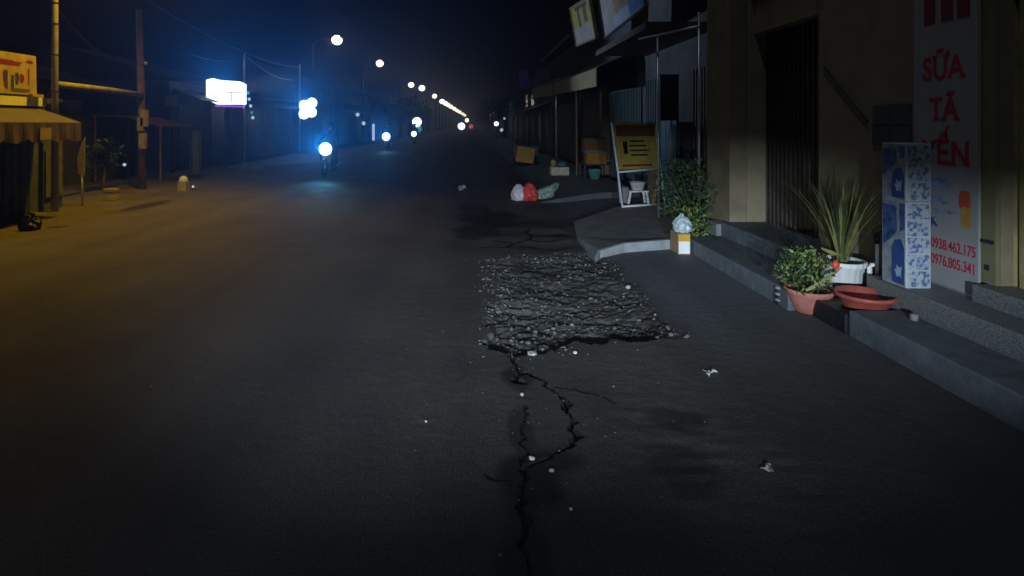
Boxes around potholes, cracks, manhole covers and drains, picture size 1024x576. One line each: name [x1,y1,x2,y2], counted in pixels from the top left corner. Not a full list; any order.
pothole [477,252,683,360]
crack [483,354,616,576]
crack [479,227,571,250]
